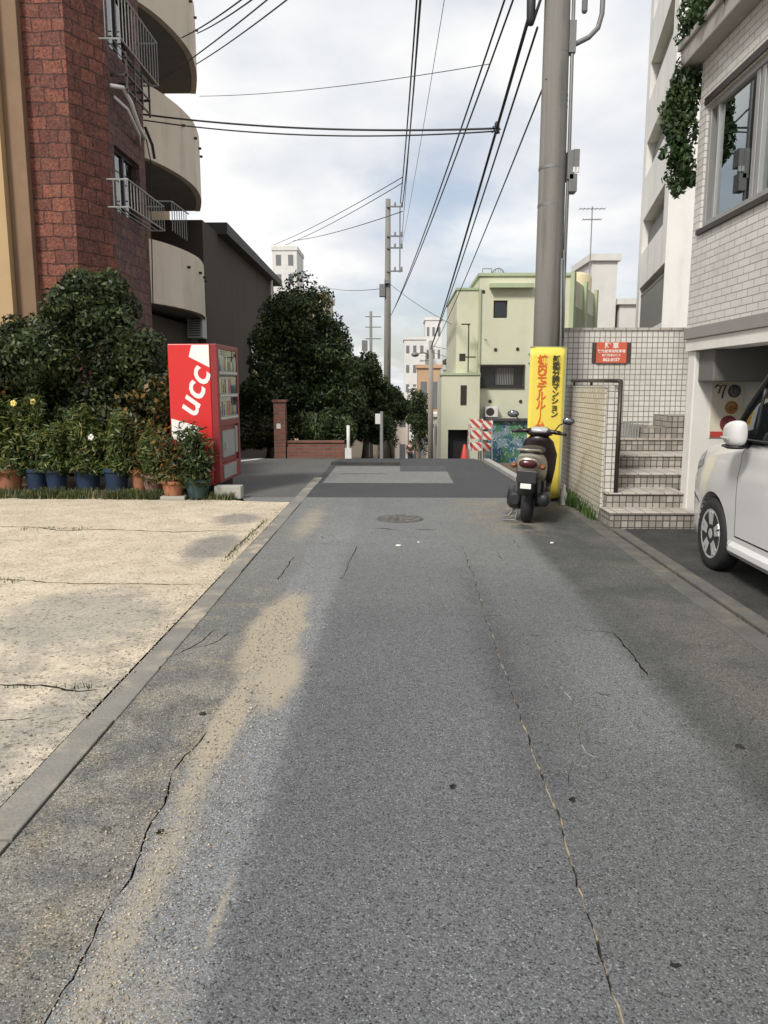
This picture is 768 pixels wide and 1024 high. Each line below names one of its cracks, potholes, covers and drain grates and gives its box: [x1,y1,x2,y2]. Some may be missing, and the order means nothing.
crack [462,547,648,1024]
manhole cover [376,514,424,523]
crack [0,684,98,692]
crack [179,631,229,654]
crack [44,732,207,1024]
